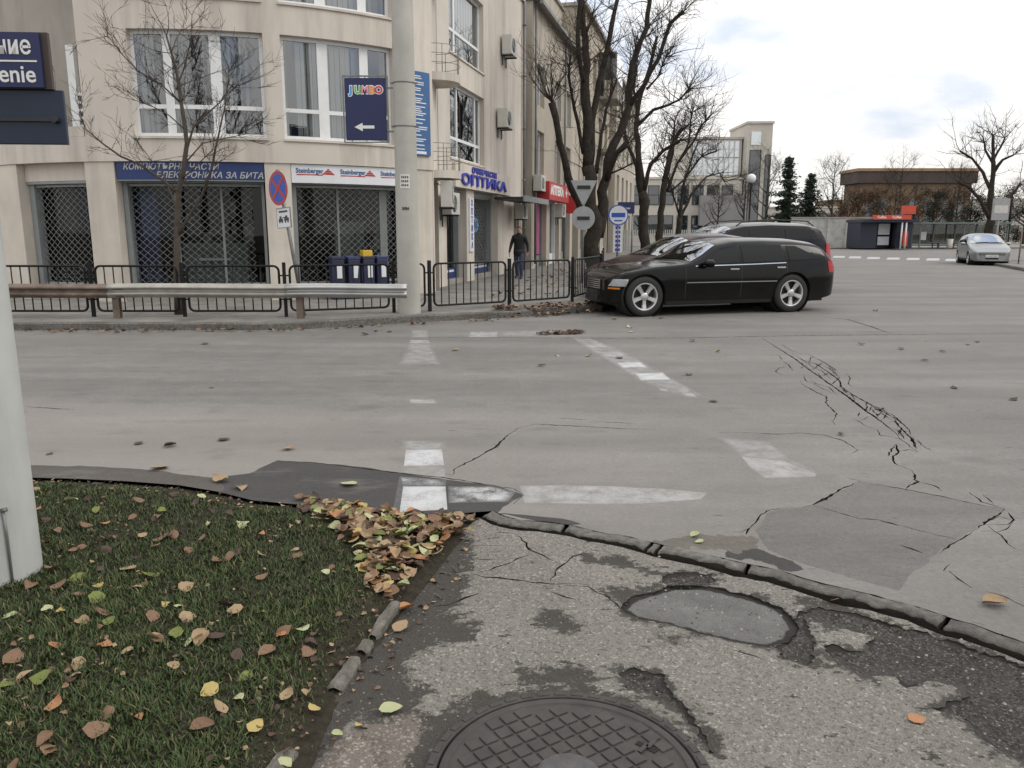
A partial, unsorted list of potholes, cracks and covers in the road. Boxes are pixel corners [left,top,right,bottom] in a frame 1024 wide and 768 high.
manhole cover [424,691,711,768]
crack [288,418,651,500]
pothole [775,607,1024,763]
pothole [618,667,713,754]
crack [435,339,1024,662]
